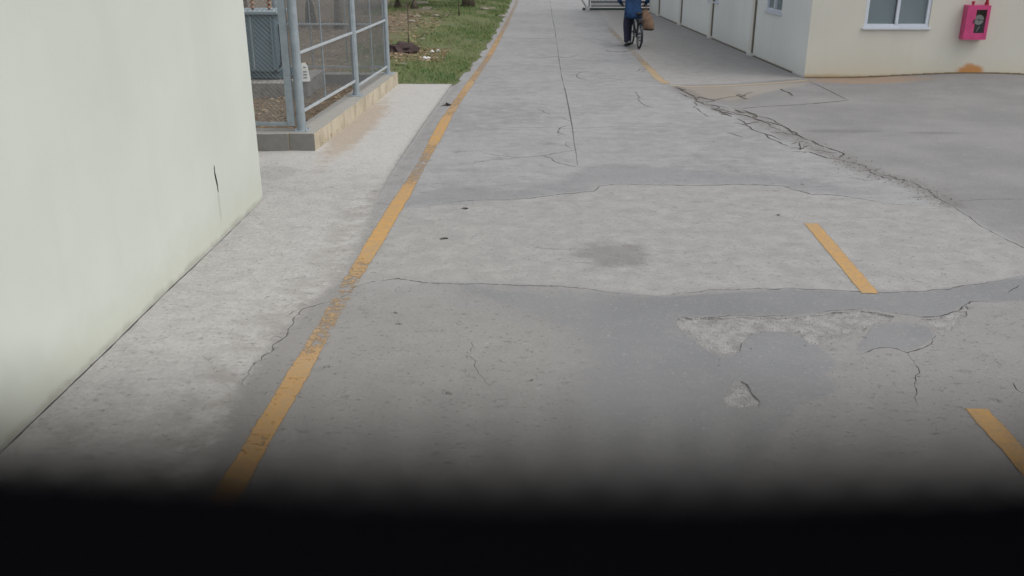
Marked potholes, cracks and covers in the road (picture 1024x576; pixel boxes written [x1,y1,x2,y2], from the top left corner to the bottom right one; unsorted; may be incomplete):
crack [638,69,946,203]
pothole [722,381,761,408]
pothole [676,310,894,356]
crack [242,278,619,386]
crack [480,110,684,166]
crack [437,184,950,207]
crack [861,339,933,403]
